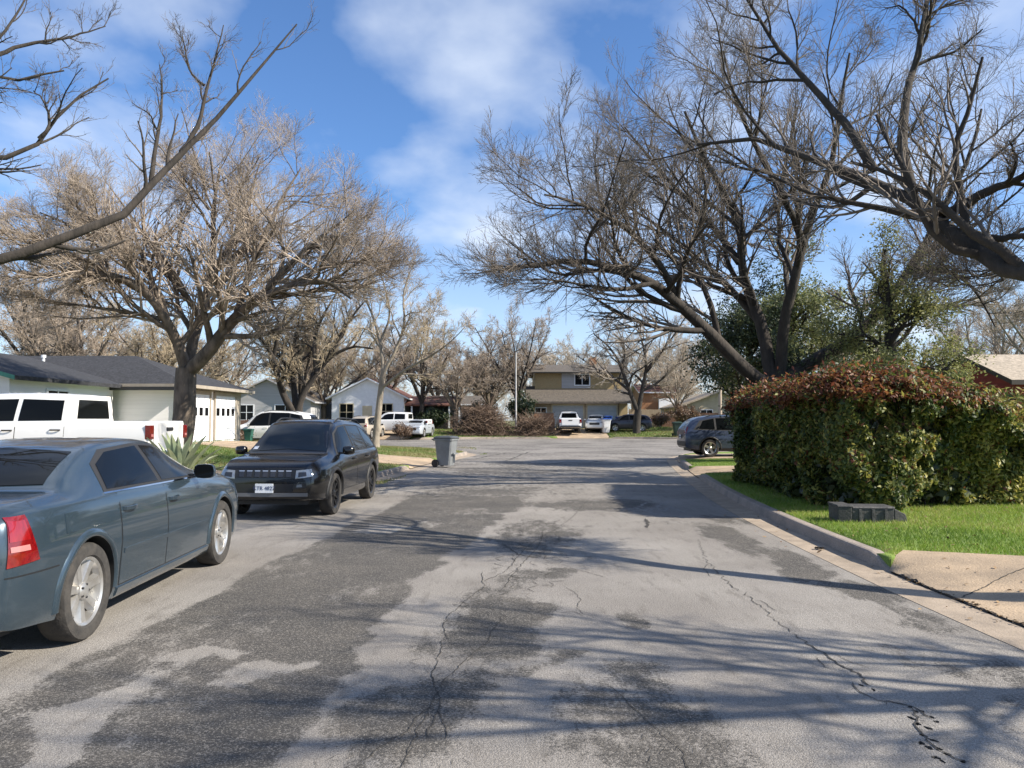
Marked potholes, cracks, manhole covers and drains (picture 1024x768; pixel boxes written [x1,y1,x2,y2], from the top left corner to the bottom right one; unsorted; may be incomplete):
crack [698,539,976,764]
crack [314,501,587,768]
